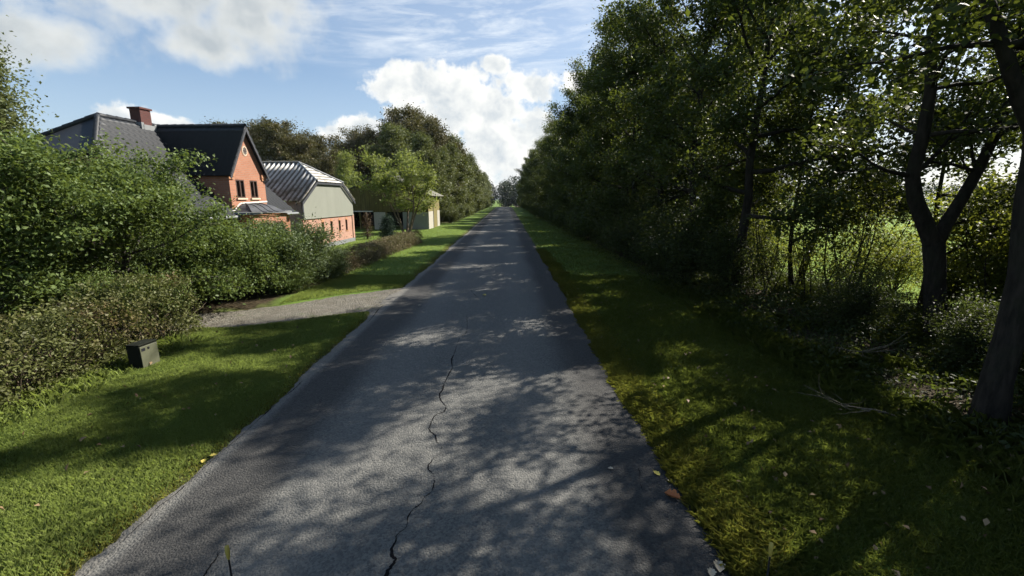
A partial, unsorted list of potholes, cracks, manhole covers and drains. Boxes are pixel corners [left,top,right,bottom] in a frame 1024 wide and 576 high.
crack [384,321,468,576]
